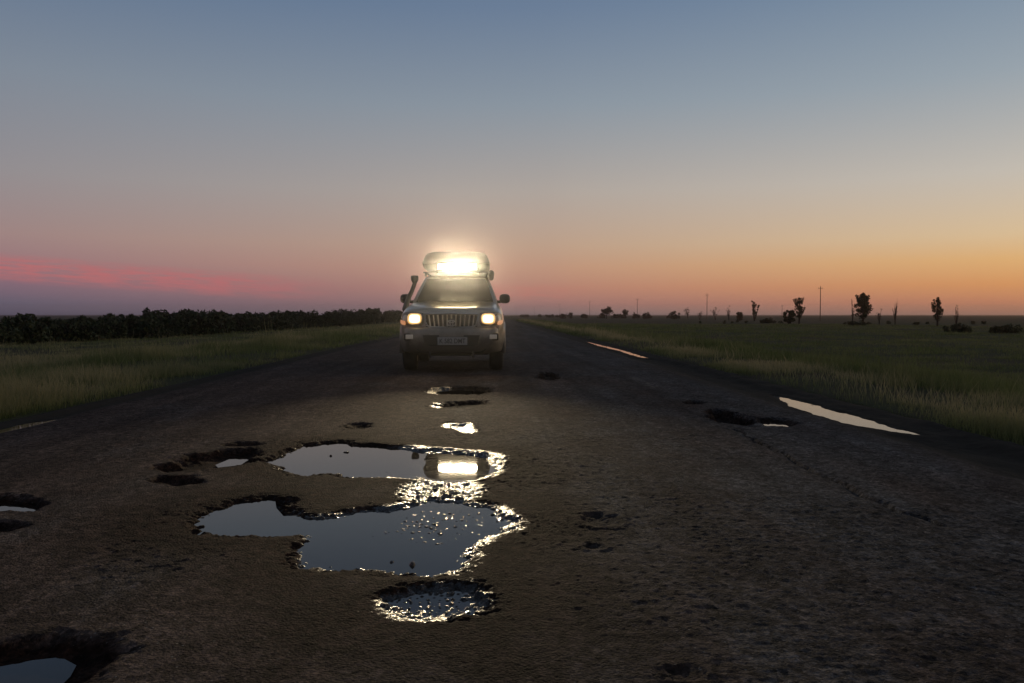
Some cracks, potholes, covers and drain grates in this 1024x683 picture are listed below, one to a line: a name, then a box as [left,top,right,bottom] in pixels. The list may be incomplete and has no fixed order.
pothole [370,578,503,624]
pothole [533,372,565,381]
pothole [0,518,38,534]
pothole [144,446,272,473]
crack [731,429,950,527]
pothole [435,421,484,434]
pothole [0,491,54,514]
pothole [143,473,216,486]
pothole [337,422,379,430]
pothole [638,657,721,683]
pothole [174,494,528,582]
